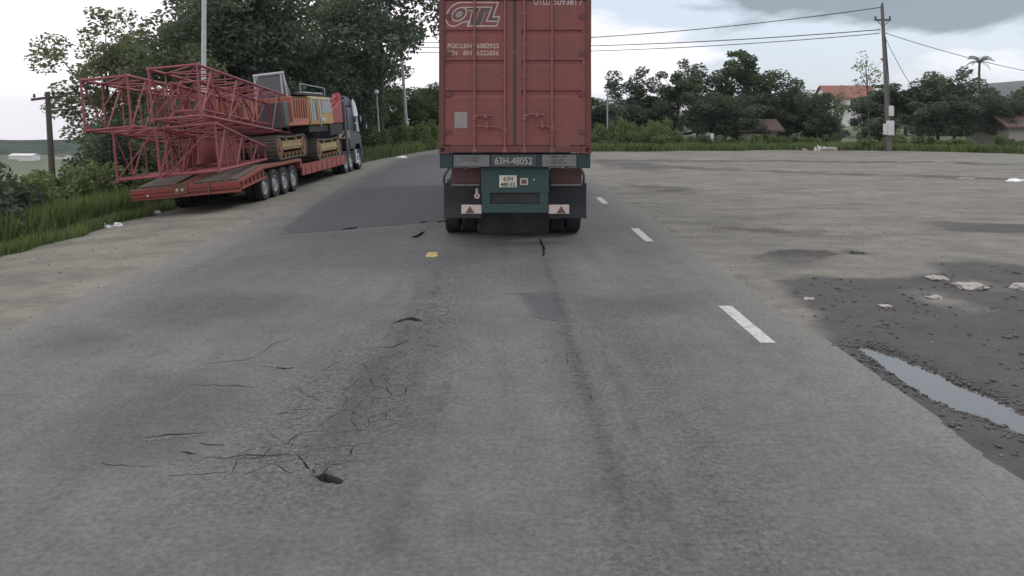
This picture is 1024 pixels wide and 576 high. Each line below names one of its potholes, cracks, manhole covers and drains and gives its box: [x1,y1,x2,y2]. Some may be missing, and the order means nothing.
pothole [759,249,837,263]
crack [535,316,592,399]
crack [101,347,417,482]
pothole [315,473,344,485]
crack [209,338,293,370]
crack [383,271,461,348]
